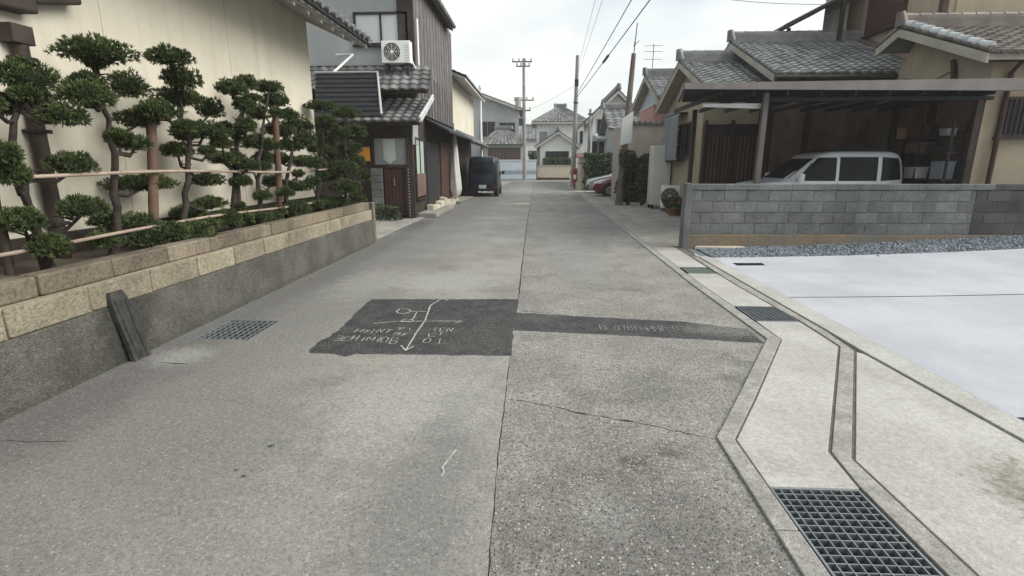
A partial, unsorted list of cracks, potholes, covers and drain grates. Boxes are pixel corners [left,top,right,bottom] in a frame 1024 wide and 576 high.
drain grate [769,487,944,576]
crack [508,399,712,439]
drain grate [194,320,279,340]
drain grate [735,306,799,322]
